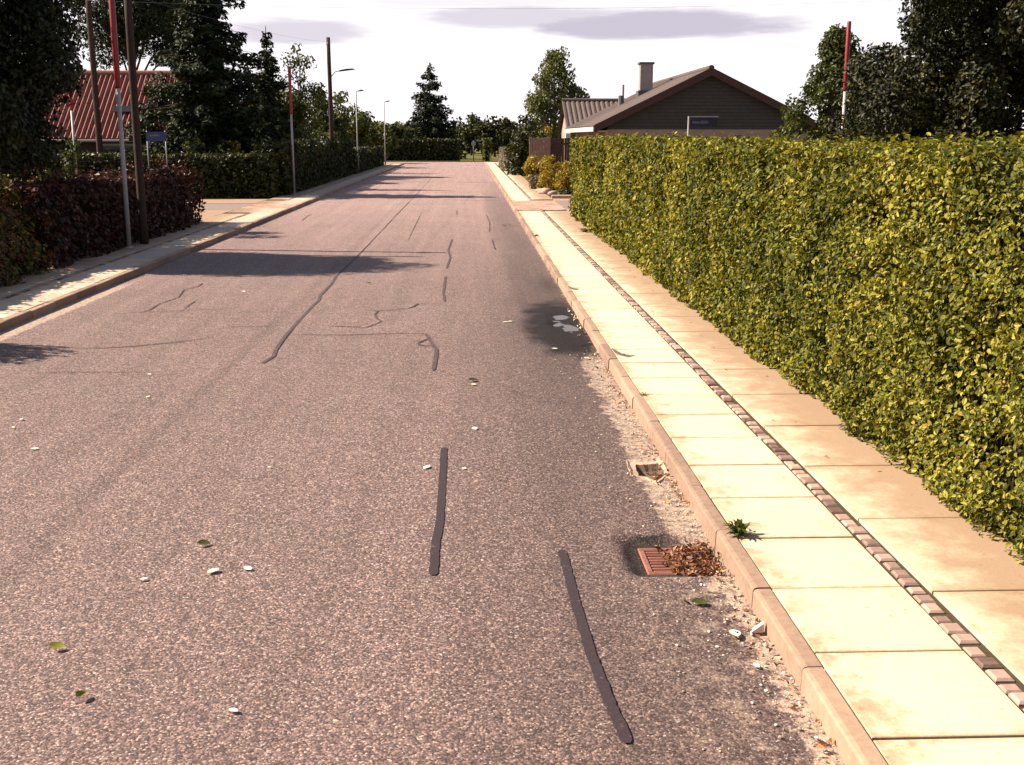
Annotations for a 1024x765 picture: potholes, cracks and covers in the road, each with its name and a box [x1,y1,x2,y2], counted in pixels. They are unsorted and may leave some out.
crack [117,283,225,314]
crack [347,303,419,327]
